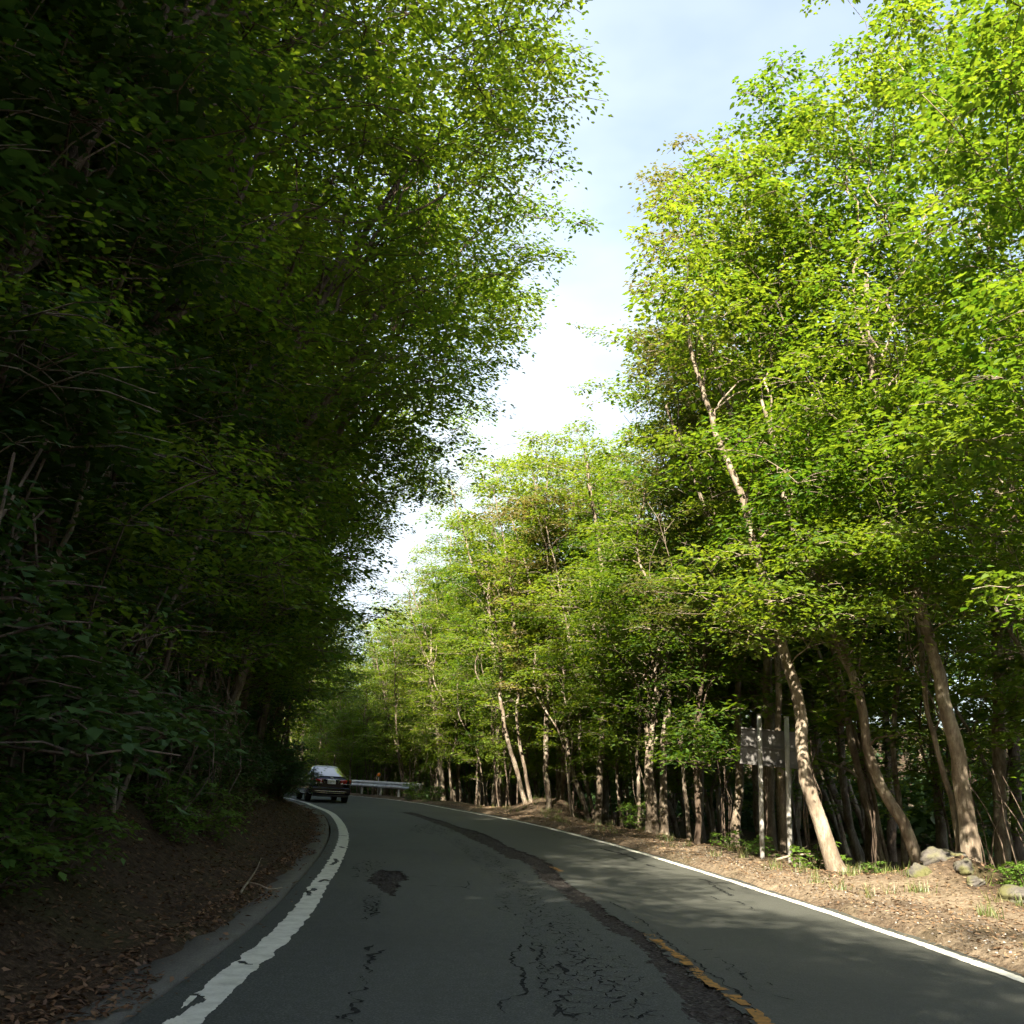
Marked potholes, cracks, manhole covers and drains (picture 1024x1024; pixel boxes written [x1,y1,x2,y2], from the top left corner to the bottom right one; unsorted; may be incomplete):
crack [362,894,383,919]
pothole [367,870,409,896]
crack [703,879,757,912]
crack [450,839,665,1021]
crack [335,945,386,1022]
crack [610,902,791,1017]
